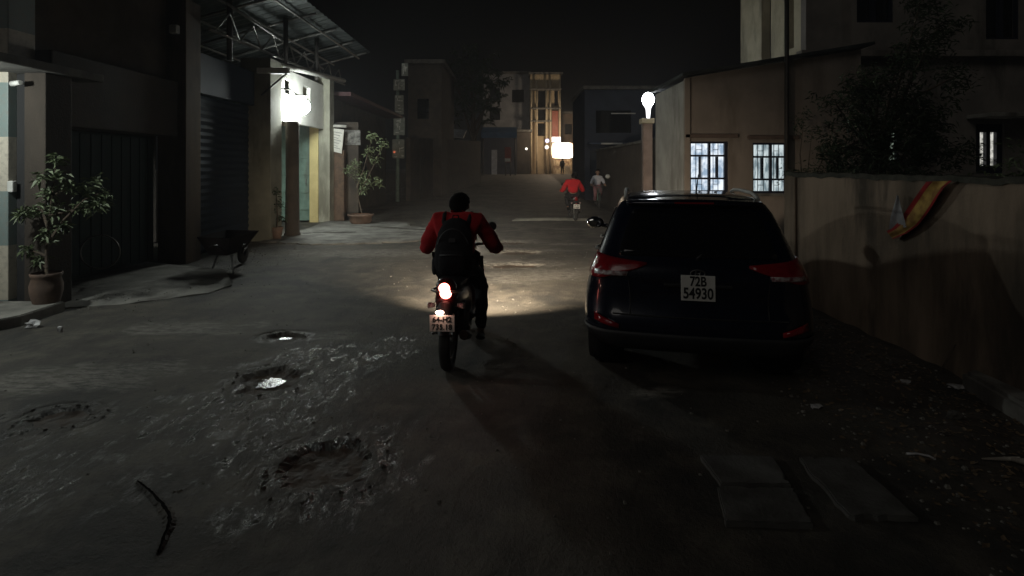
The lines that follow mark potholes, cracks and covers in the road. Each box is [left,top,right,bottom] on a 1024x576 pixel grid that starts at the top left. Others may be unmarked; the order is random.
pothole [255,330,311,343]
pothole [219,360,323,403]
manhole cover [799,456,918,522]
crack [136,480,178,554]
manhole cover [717,486,813,529]
pothole [247,430,397,507]
manhole cover [700,455,791,488]
pothole [3,402,113,437]
